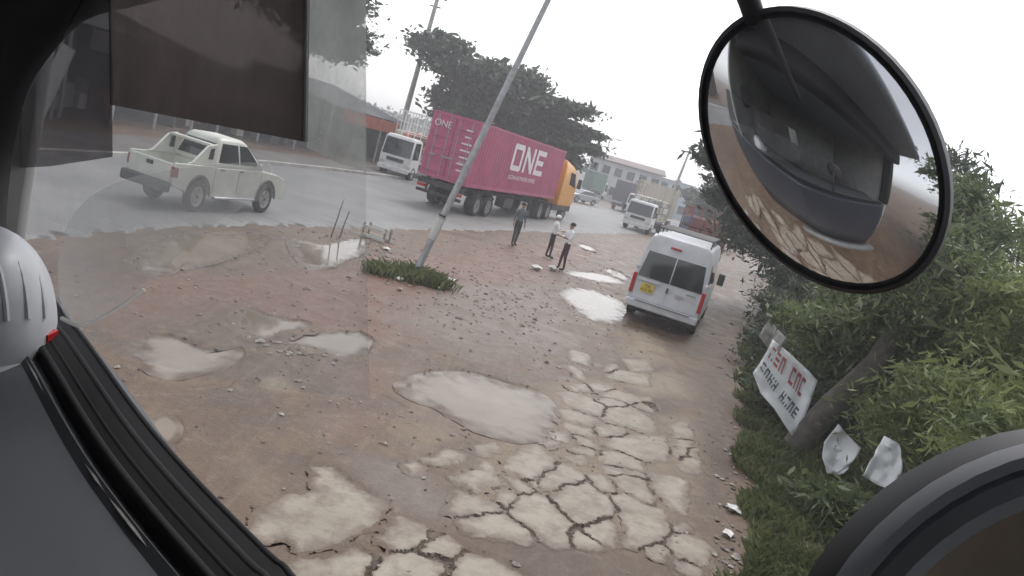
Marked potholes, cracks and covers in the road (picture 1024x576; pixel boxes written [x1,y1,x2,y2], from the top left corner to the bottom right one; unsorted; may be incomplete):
pothole [573,242,600,253]
pothole [114,329,262,389]
pothole [377,364,571,451]
pothole [278,325,386,363]
pothole [222,302,324,344]
crack [364,369,697,576]
pothole [549,285,636,326]
pothole [557,269,630,286]
pothole [273,234,379,273]
